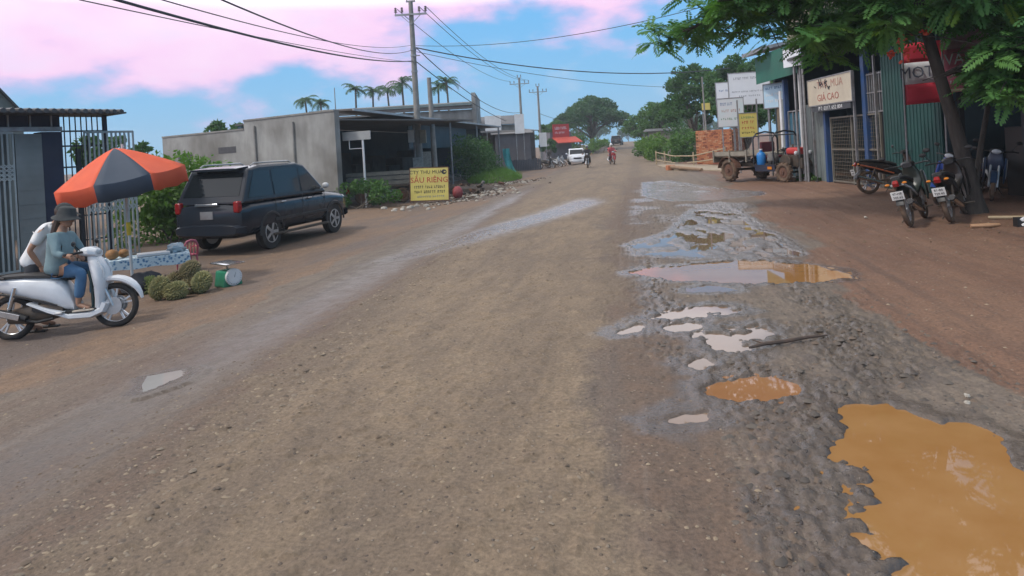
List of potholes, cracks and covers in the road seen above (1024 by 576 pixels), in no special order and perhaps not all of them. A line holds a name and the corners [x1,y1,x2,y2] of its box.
pothole [647,317,716,336]
pothole [638,400,733,435]
pothole [131,368,198,394]
pothole [678,317,801,364]
pothole [687,366,819,410]
pothole [618,208,819,262]
pothole [601,320,656,339]
pothole [639,301,759,322]
pothole [794,389,1024,576]
pothole [618,259,864,286]
